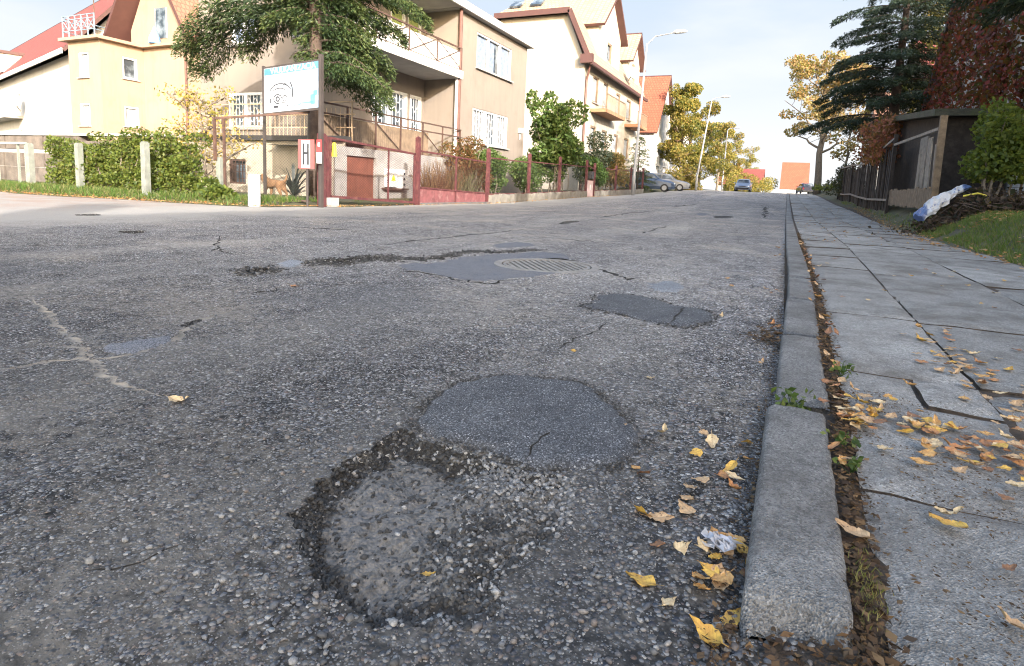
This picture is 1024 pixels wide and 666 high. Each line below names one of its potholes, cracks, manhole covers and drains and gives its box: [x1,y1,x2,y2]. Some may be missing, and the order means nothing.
crack [195,235,243,256]
crack [556,322,653,350]
crack [526,431,551,459]
pothole [286,428,576,629]
